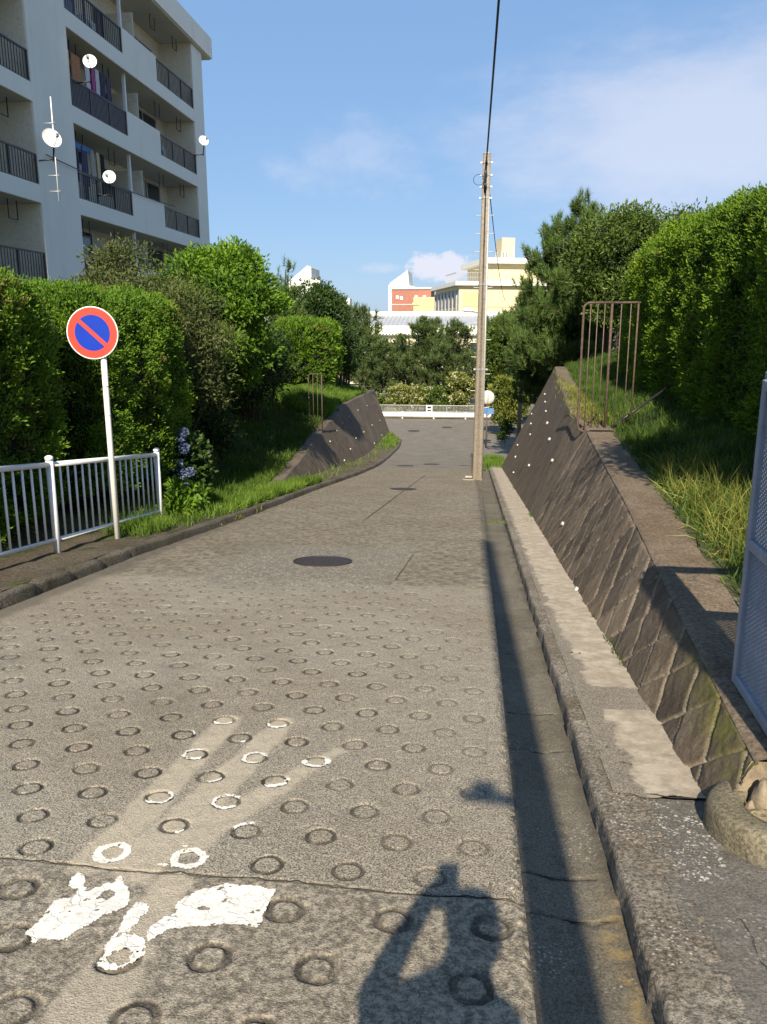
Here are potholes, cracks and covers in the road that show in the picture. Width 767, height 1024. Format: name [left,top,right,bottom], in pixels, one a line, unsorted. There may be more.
crack [529,873,591,881]
manhole cover [293,556,352,567]
